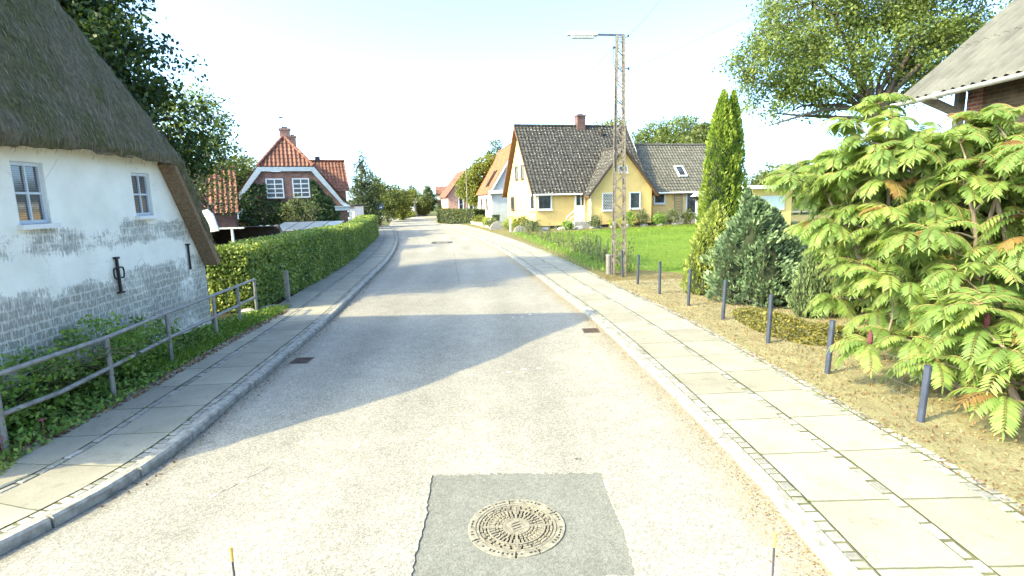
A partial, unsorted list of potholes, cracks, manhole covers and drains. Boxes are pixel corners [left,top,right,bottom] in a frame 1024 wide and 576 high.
manhole cover [468,499,565,558]
